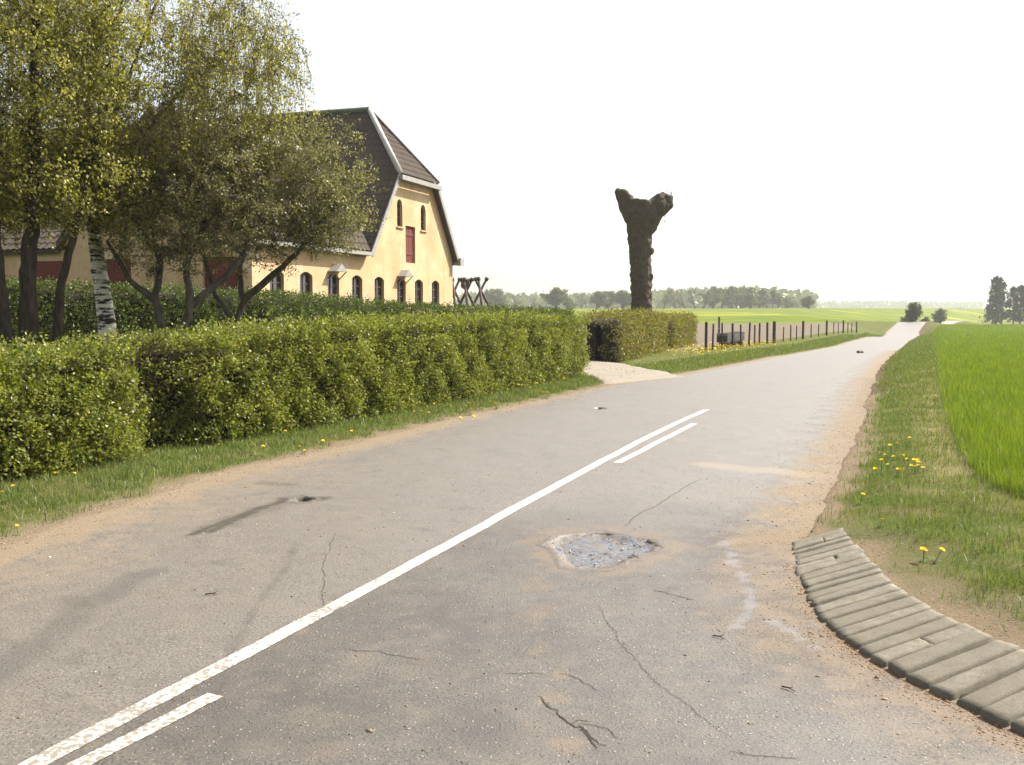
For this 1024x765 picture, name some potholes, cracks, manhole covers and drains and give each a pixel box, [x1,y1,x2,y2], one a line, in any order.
pothole [535,529,671,572]
crack [539,695,618,749]
crack [600,609,729,736]
